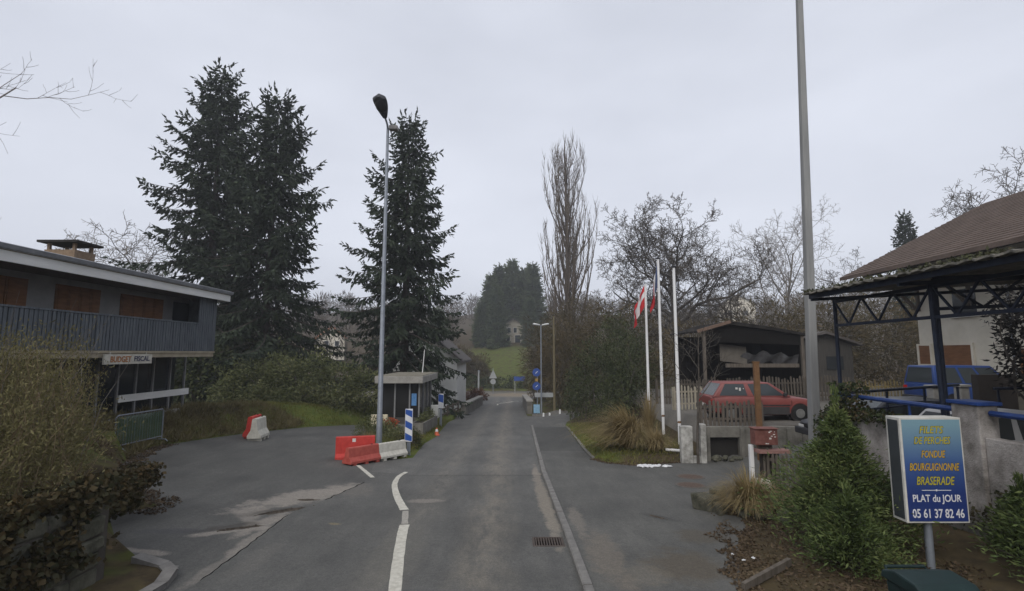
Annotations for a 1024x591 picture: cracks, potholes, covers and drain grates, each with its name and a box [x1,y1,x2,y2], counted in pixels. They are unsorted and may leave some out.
drain grate [532,537,565,546]
